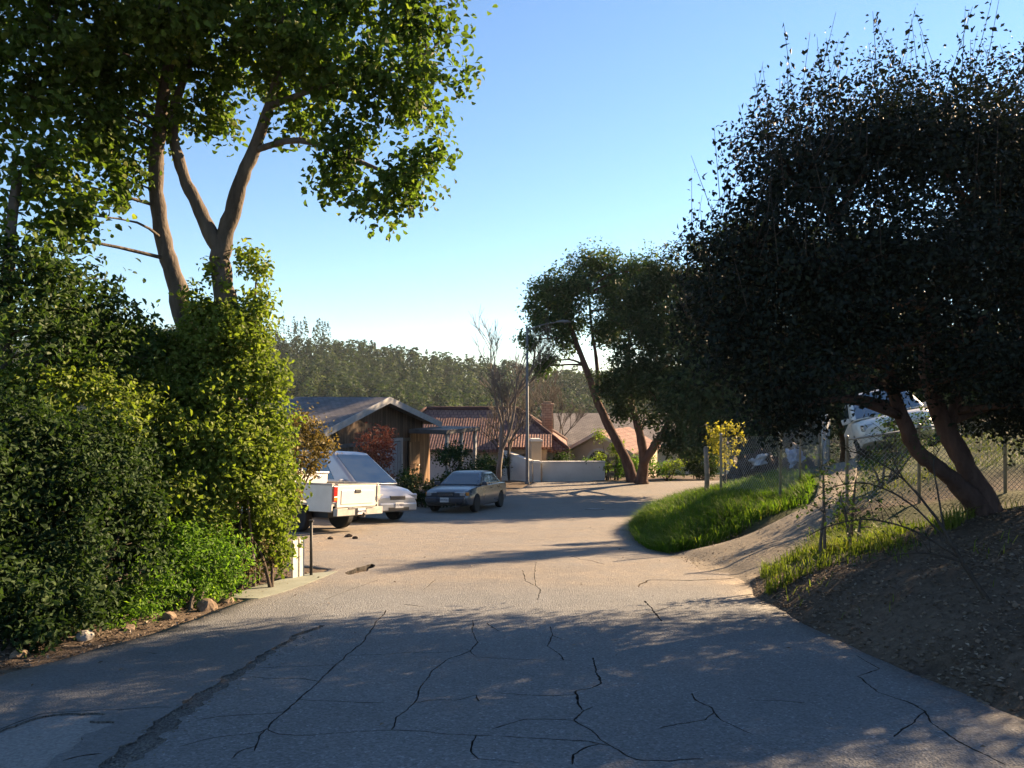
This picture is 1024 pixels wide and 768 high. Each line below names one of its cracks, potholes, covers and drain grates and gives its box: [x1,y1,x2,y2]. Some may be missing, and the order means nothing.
pothole [346,564,375,575]
crack [857,656,1005,765]
crack [1,707,149,729]
crack [178,580,753,764]
